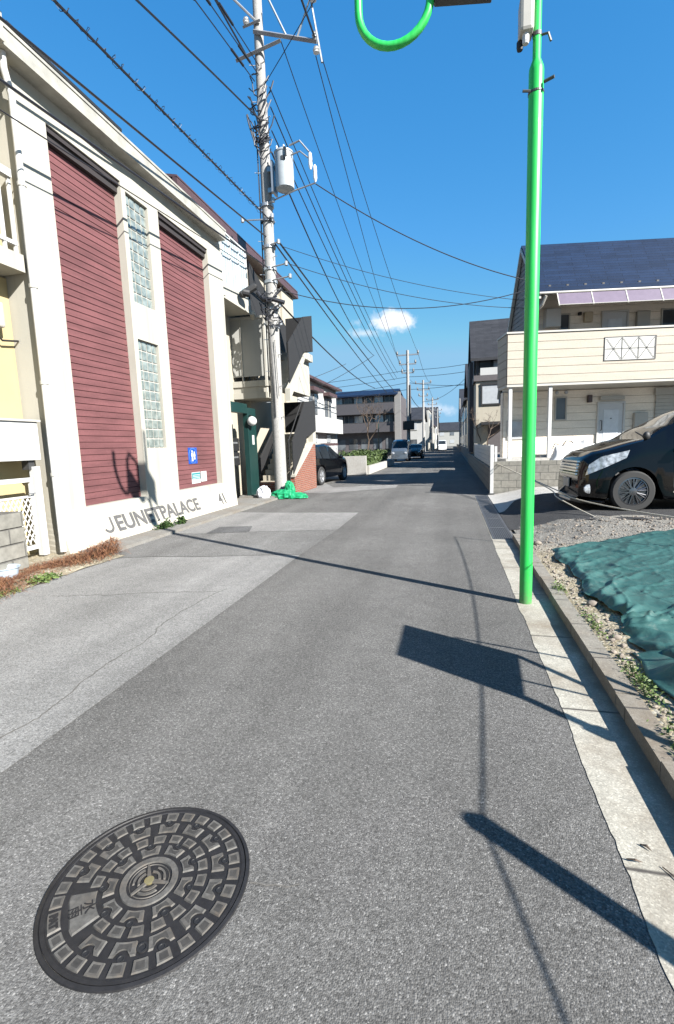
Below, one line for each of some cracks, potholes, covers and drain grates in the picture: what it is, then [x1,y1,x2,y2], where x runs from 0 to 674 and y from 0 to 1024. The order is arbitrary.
crack [0,589,225,738]
manhole cover [33,807,250,994]
drain grate [475,495,513,539]
